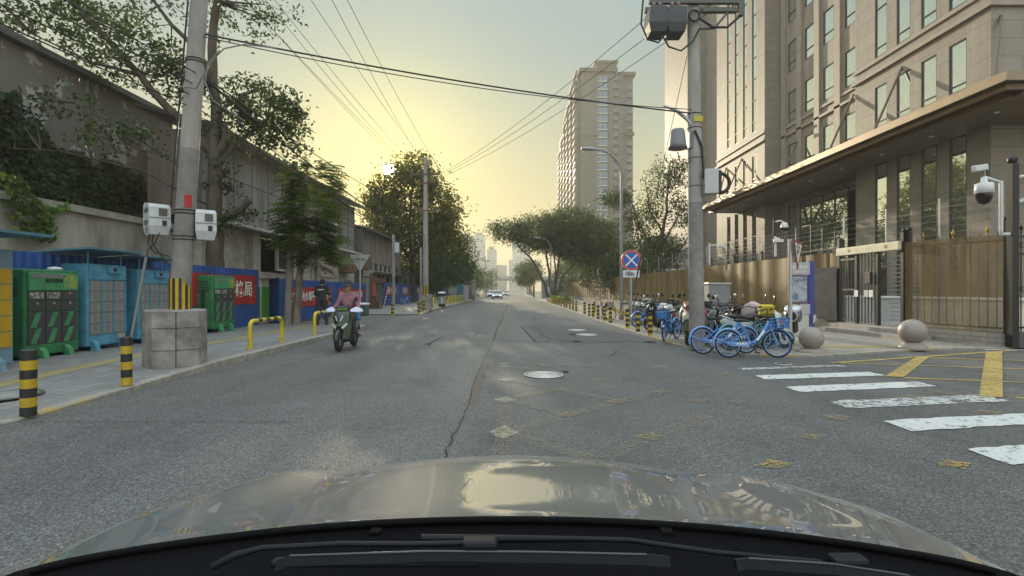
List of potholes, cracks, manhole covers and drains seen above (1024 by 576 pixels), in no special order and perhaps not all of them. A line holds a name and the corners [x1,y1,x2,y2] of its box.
crack [430,315,504,458]
